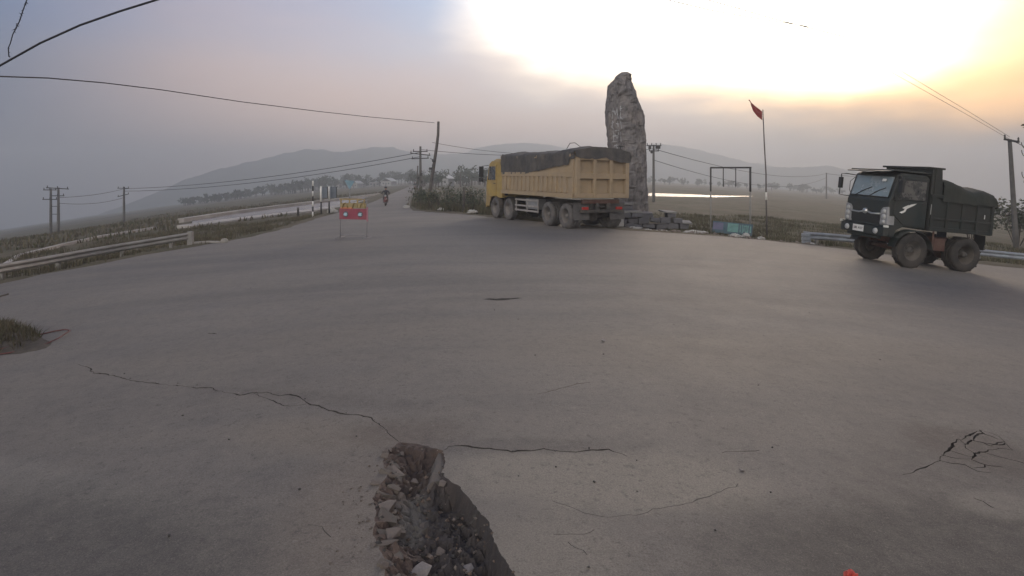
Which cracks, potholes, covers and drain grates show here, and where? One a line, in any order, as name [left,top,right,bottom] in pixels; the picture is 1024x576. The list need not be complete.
pothole [372,442,515,576]
crack [554,484,738,555]
crack [446,445,626,456]
crack [903,430,1023,475]
crack [80,365,398,441]
